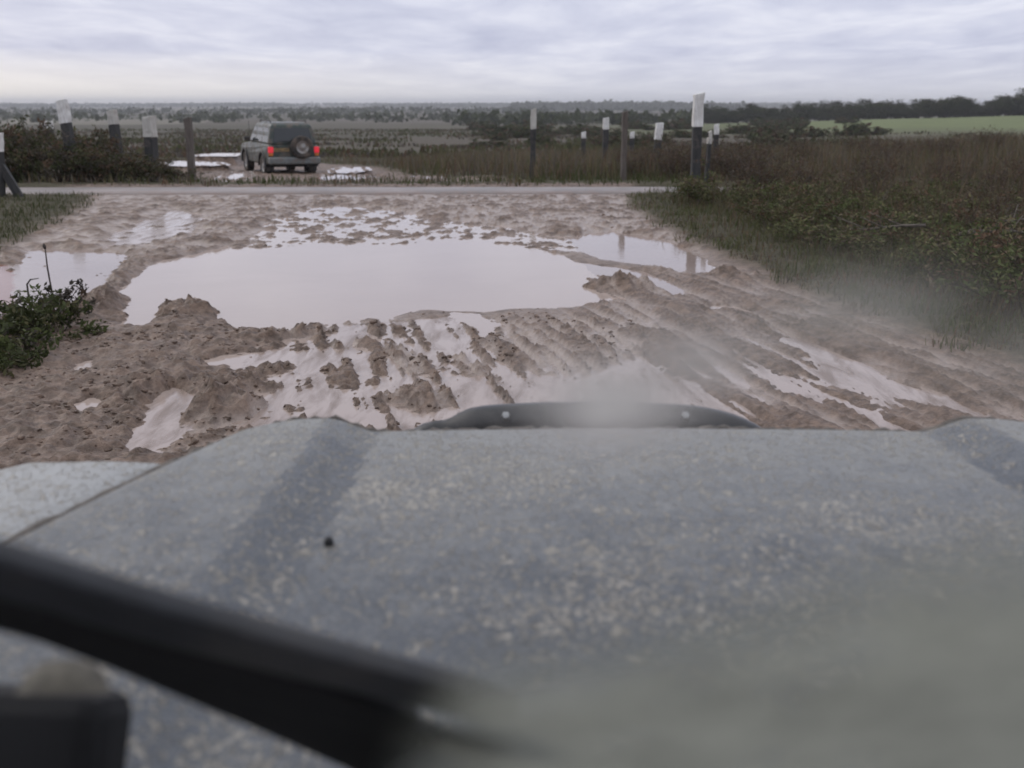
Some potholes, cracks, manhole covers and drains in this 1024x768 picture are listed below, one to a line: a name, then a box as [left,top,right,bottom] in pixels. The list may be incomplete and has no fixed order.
pothole [97,246,639,331]
pothole [0,238,166,313]
